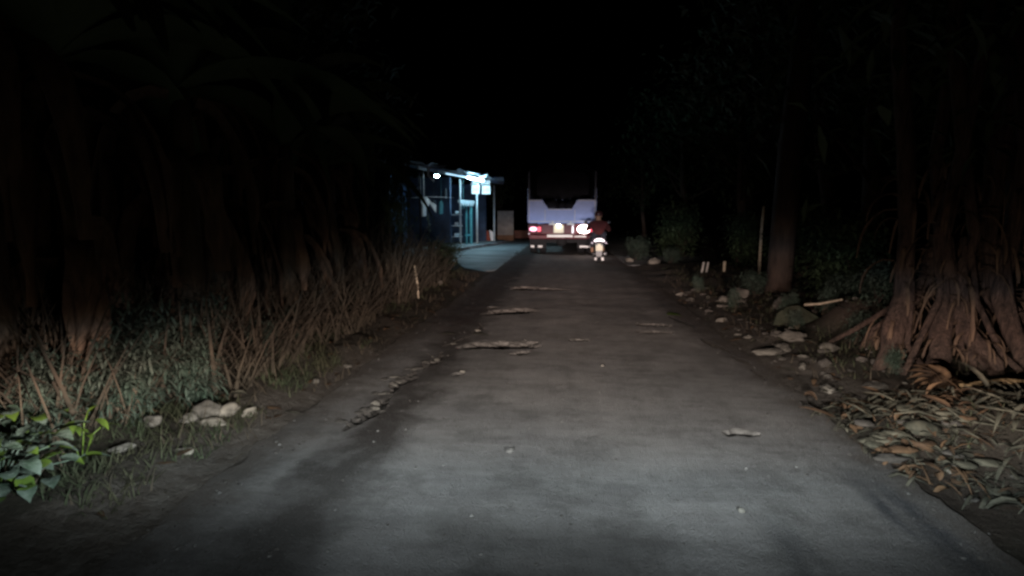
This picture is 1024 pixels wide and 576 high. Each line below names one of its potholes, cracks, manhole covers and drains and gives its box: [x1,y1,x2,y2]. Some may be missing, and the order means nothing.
pothole [721,428,761,437]
pothole [455,340,541,350]
pothole [481,307,539,315]
